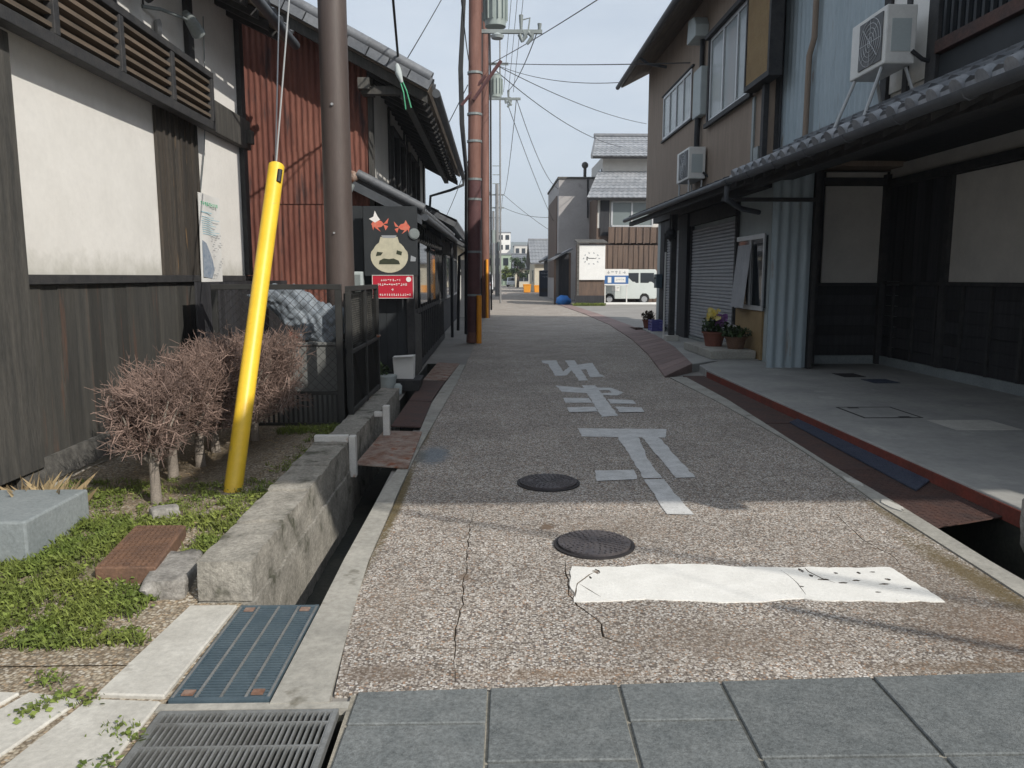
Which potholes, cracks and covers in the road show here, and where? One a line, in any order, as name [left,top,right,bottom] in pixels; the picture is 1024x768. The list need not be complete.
drain grate [117,708,339,768]
manhole cover [554,529,635,560]
drain grate [168,604,319,704]
utility cover [836,407,923,418]
crack [834,513,939,575]
crack [538,562,633,644]
crack [375,512,522,679]
manhole cover [517,473,580,492]
